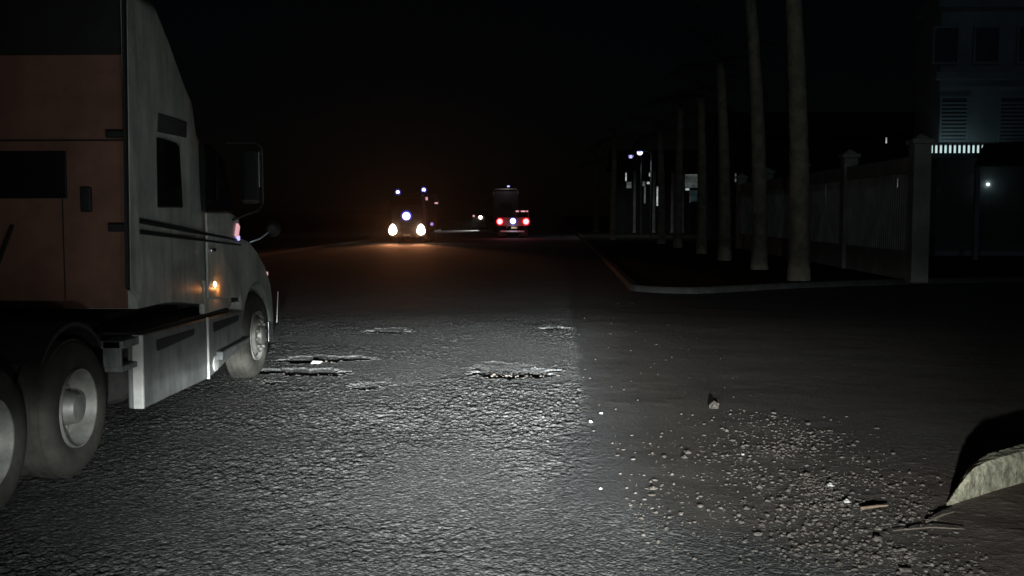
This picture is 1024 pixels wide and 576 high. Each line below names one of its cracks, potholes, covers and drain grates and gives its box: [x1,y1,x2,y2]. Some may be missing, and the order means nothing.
pothole [460,360,567,381]
pothole [259,367,360,377]
pothole [269,354,382,365]
pothole [345,381,397,392]
